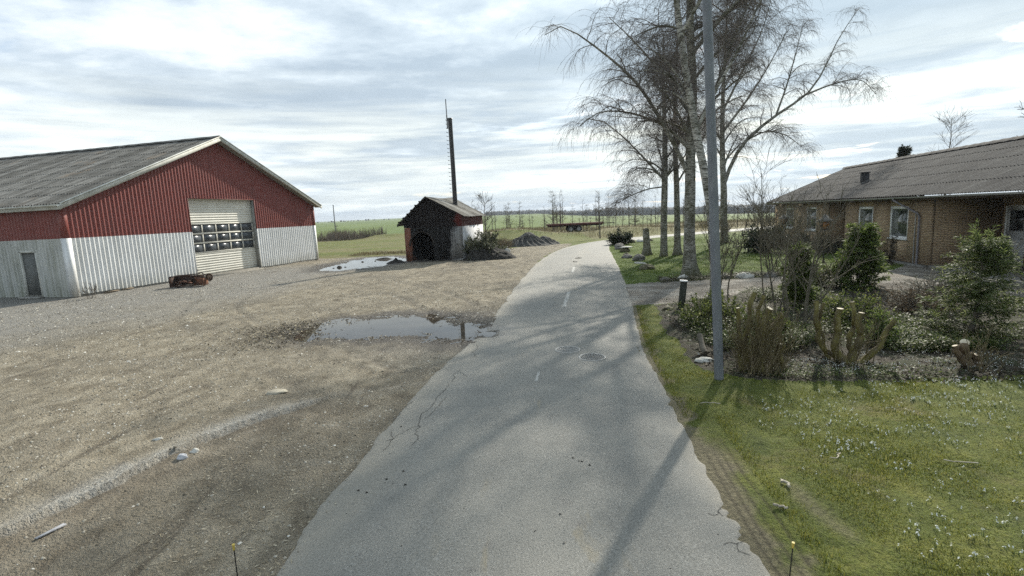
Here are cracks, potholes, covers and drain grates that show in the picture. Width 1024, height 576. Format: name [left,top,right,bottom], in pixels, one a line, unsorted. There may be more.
manhole cover [578,353,606,361]
crack [385,351,476,449]
